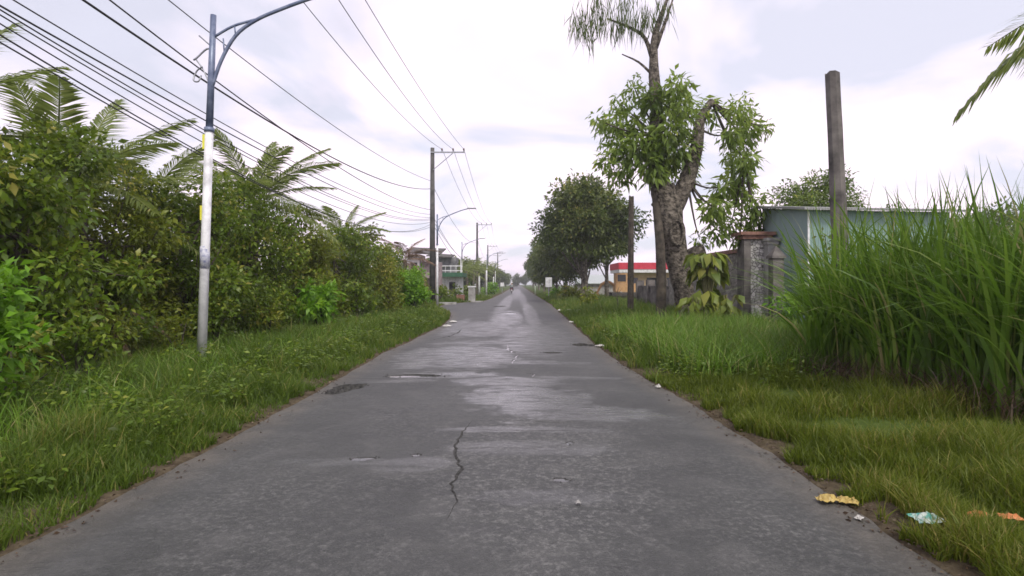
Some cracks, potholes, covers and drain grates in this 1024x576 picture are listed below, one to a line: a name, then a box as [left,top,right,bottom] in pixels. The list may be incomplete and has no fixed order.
crack [446,420,599,521]
pothole [322,382,369,395]
